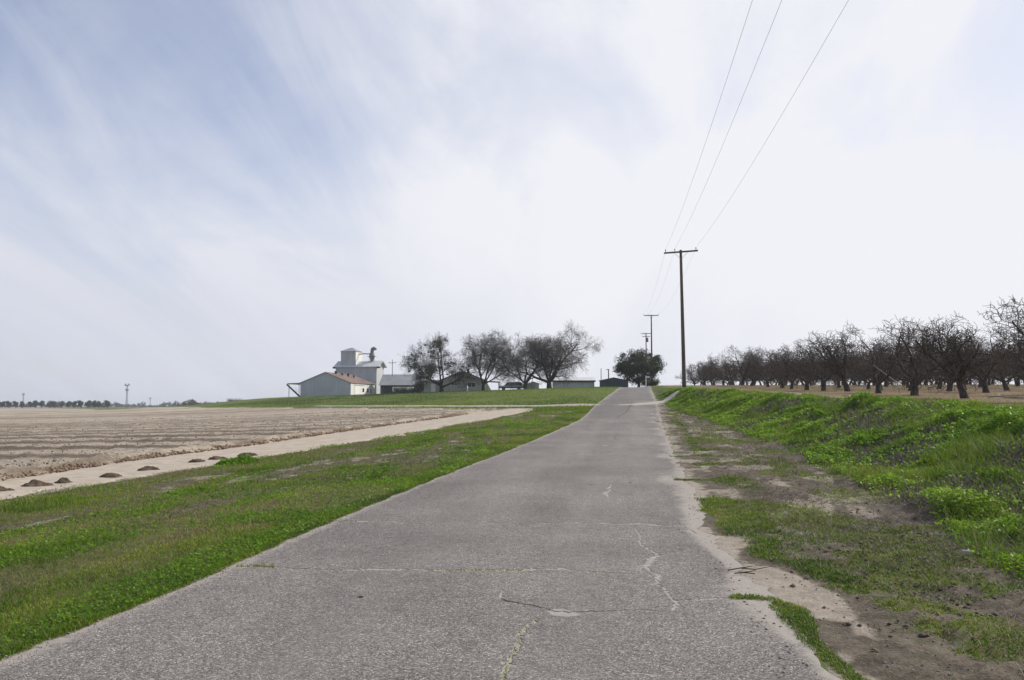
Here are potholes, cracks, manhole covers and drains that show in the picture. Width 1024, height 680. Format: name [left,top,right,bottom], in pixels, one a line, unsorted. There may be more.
crack [236,519,728,680]
